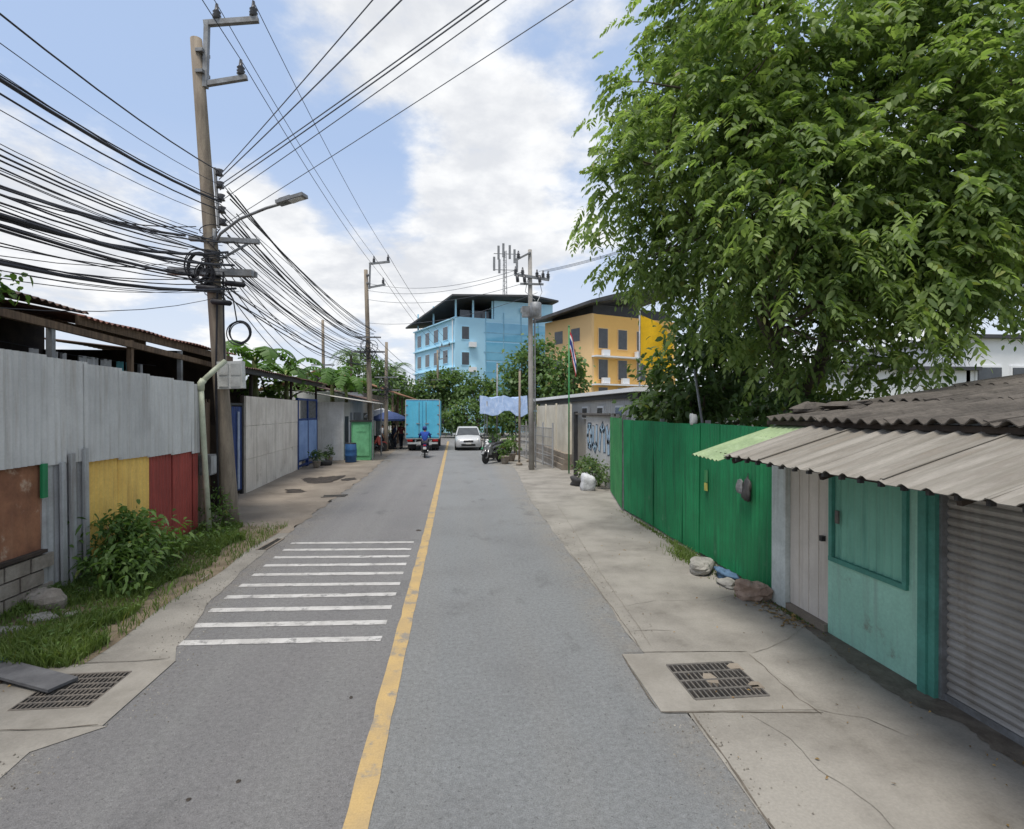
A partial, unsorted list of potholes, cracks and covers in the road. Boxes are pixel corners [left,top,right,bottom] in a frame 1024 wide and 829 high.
drain grate [622,652,817,718]
crack [750,630,905,735]
crack [750,714,893,827]
drain grate [0,660,176,732]
